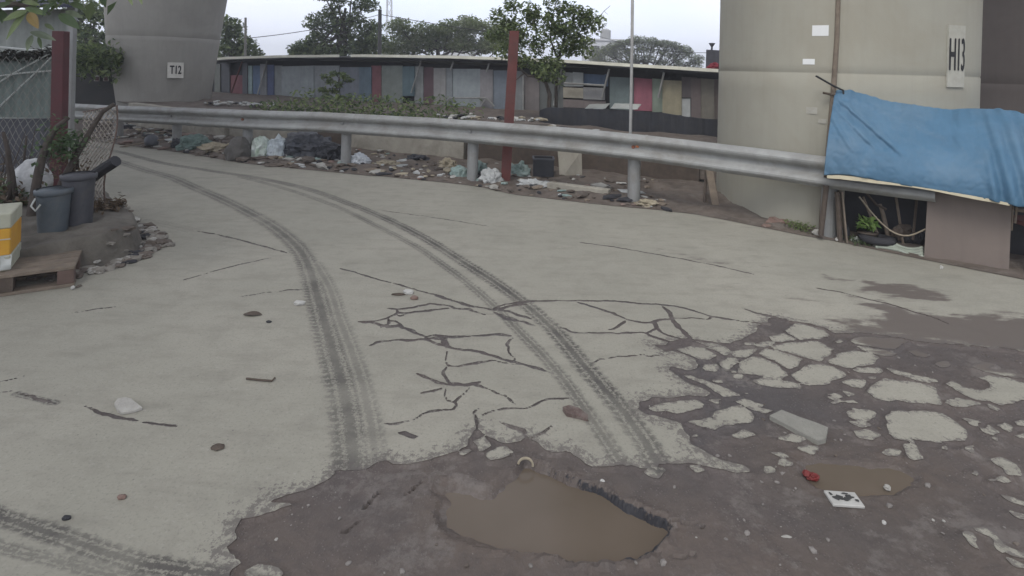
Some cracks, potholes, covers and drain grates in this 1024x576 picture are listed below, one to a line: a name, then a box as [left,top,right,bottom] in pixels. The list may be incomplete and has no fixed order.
pothole [428,455,678,564]
crack [579,242,754,275]
crack [184,231,287,280]
crack [4,378,177,427]
crack [340,268,1024,452]
pothole [794,451,925,498]
